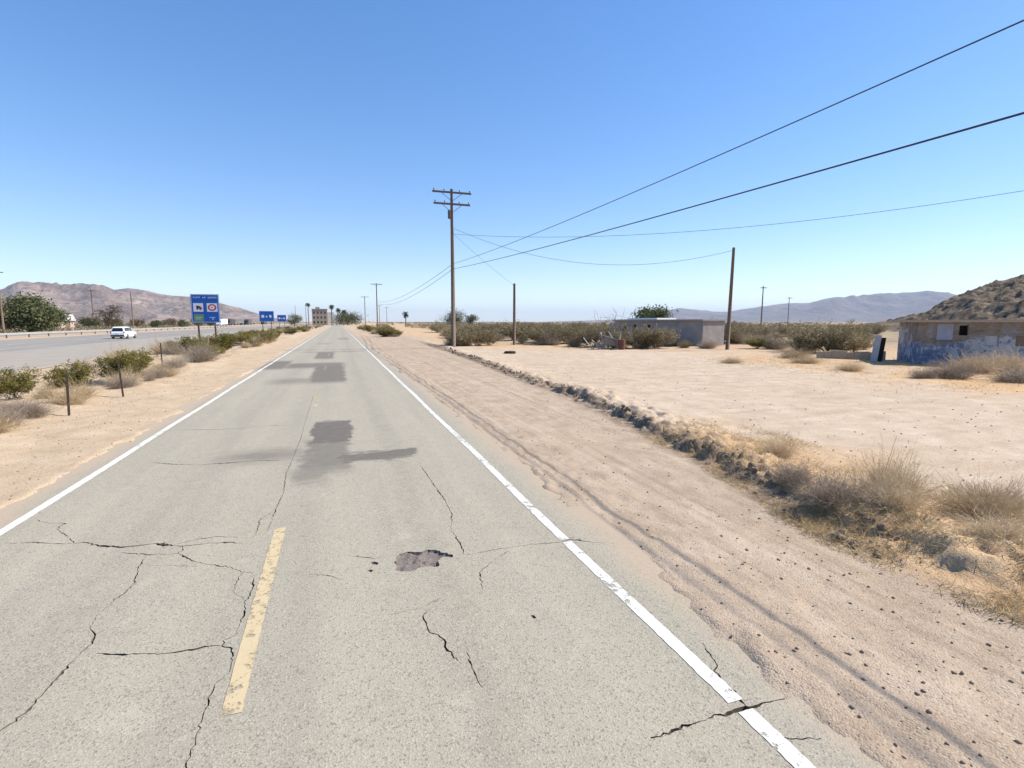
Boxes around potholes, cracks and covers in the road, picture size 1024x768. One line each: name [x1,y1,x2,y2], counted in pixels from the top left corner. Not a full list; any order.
crack [650,644,821,740]
crack [422,468,599,590]
crack [0,520,254,768]
pothole [394,549,453,572]
crack [394,598,483,688]
crack [153,401,312,537]
